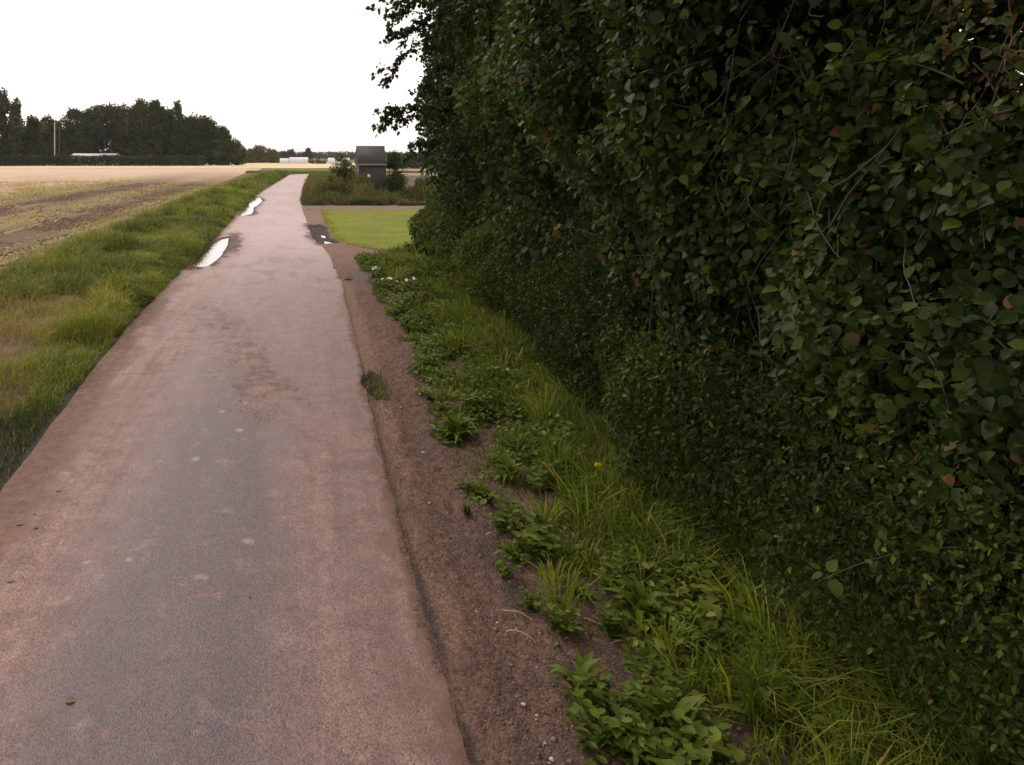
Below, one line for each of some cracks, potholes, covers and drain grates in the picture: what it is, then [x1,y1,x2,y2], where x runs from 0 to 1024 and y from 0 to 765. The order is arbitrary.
pothole [239,196,263,216]
pothole [189,237,230,267]
